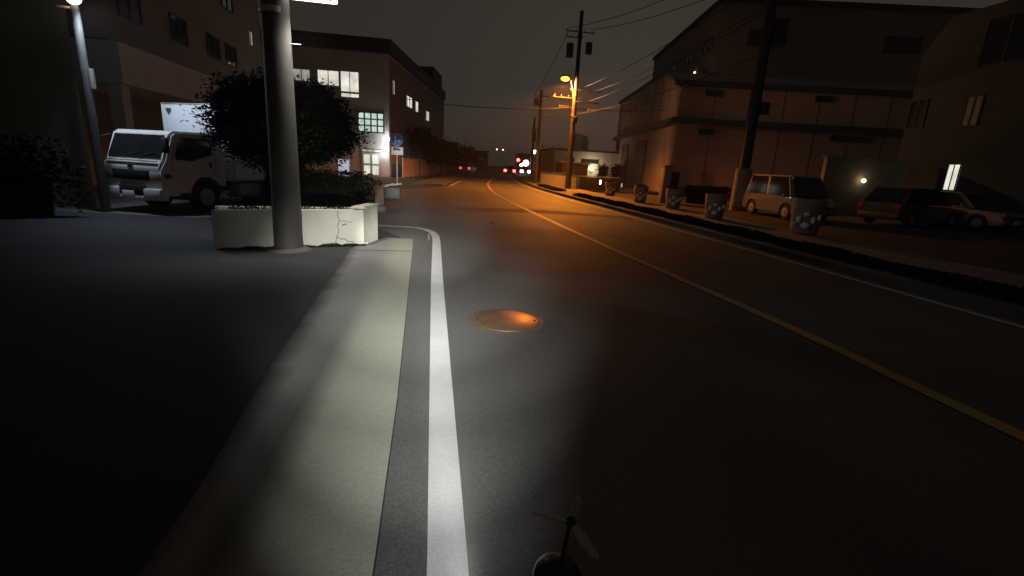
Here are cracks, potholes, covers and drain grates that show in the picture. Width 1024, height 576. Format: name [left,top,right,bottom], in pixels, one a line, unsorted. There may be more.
manhole cover [467,309,545,334]
